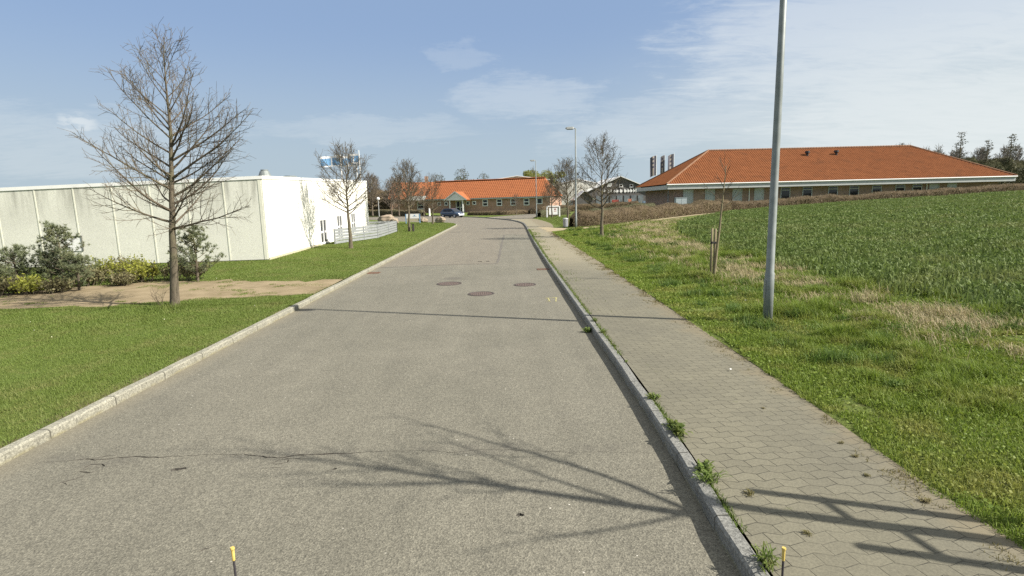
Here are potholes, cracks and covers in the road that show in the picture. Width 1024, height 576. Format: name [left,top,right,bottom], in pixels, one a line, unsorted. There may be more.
crack [40,449,644,485]
